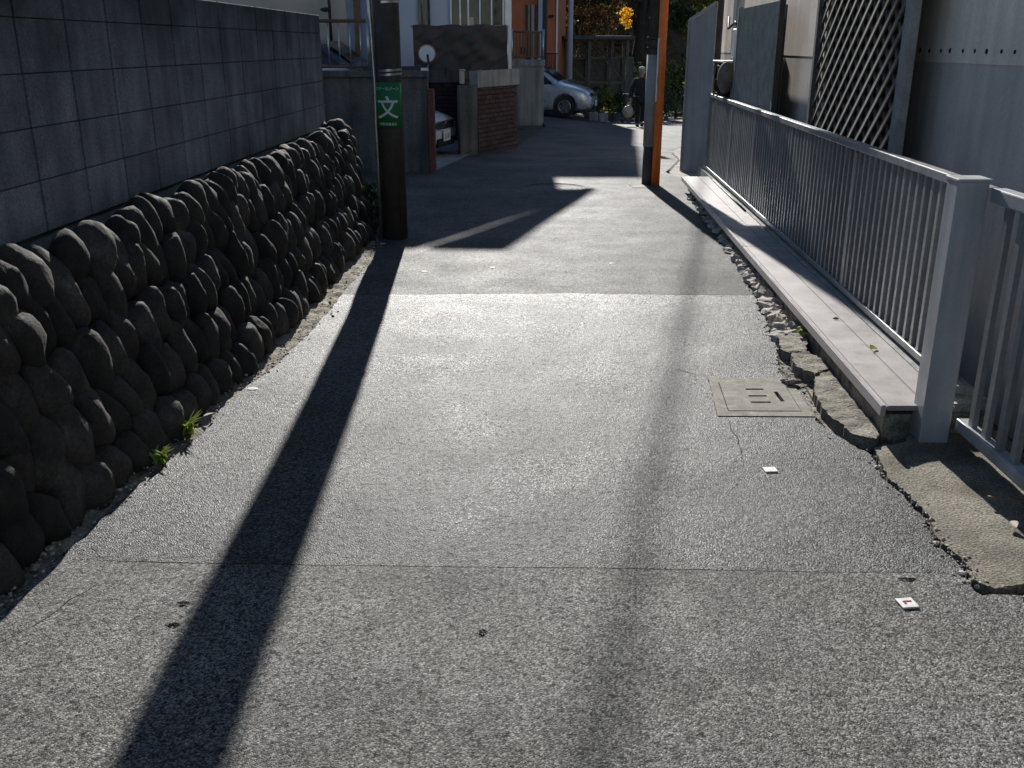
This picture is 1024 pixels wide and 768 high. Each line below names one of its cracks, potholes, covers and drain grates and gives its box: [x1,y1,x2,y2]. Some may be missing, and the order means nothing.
manhole cover [708,378,815,417]
